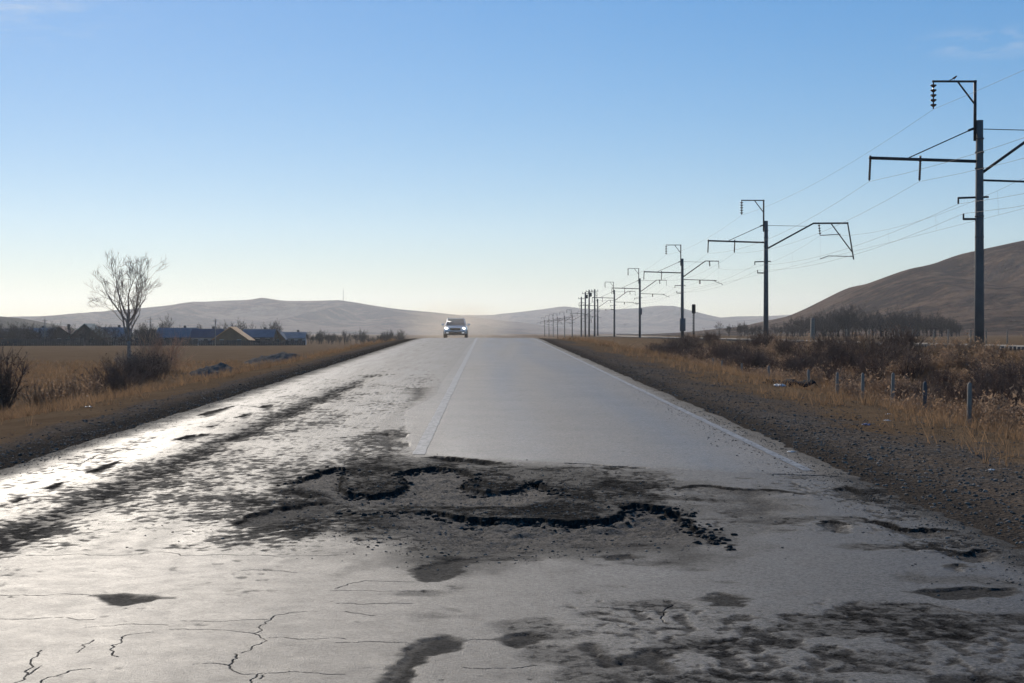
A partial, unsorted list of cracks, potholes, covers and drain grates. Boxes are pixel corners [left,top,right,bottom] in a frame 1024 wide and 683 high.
pothole [340,502,736,564]
pothole [281,466,571,509]
pothole [420,456,506,468]
pothole [813,520,860,534]
crack [0,580,421,683]
